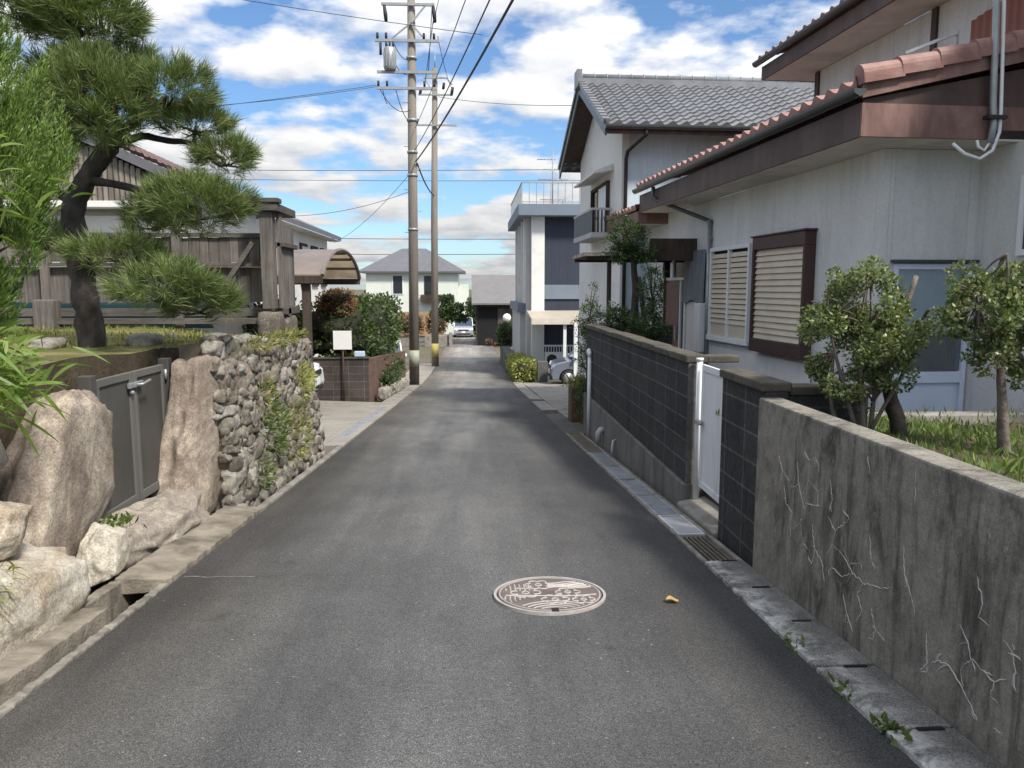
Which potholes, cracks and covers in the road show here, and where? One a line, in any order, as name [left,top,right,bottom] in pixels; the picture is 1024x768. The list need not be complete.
manhole cover [494,576,606,616]
